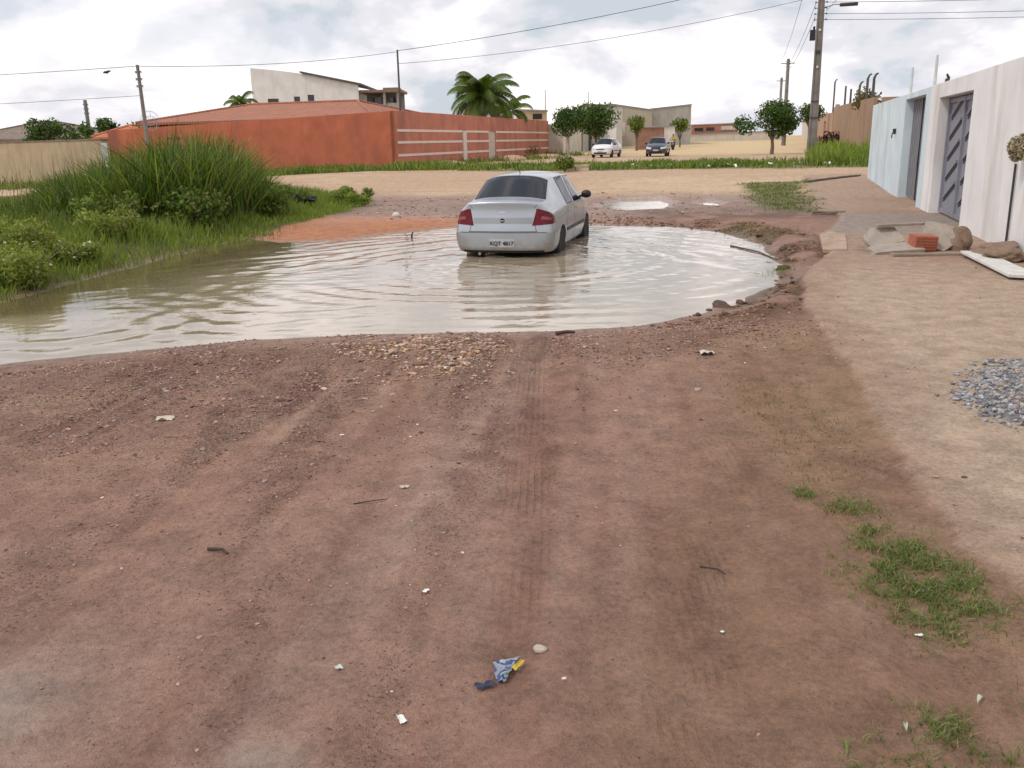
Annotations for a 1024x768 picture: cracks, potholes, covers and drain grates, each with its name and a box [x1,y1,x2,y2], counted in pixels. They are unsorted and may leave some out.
pothole [587,194,685,210]
pothole [0,221,816,372]
